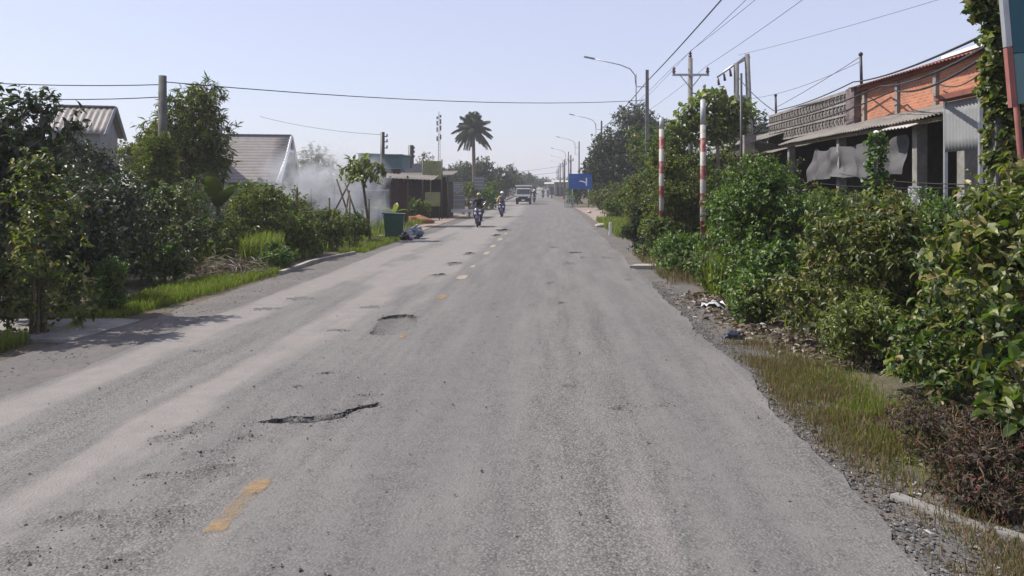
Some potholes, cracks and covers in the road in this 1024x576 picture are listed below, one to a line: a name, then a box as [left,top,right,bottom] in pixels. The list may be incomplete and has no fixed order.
pothole [370,314,418,335]
